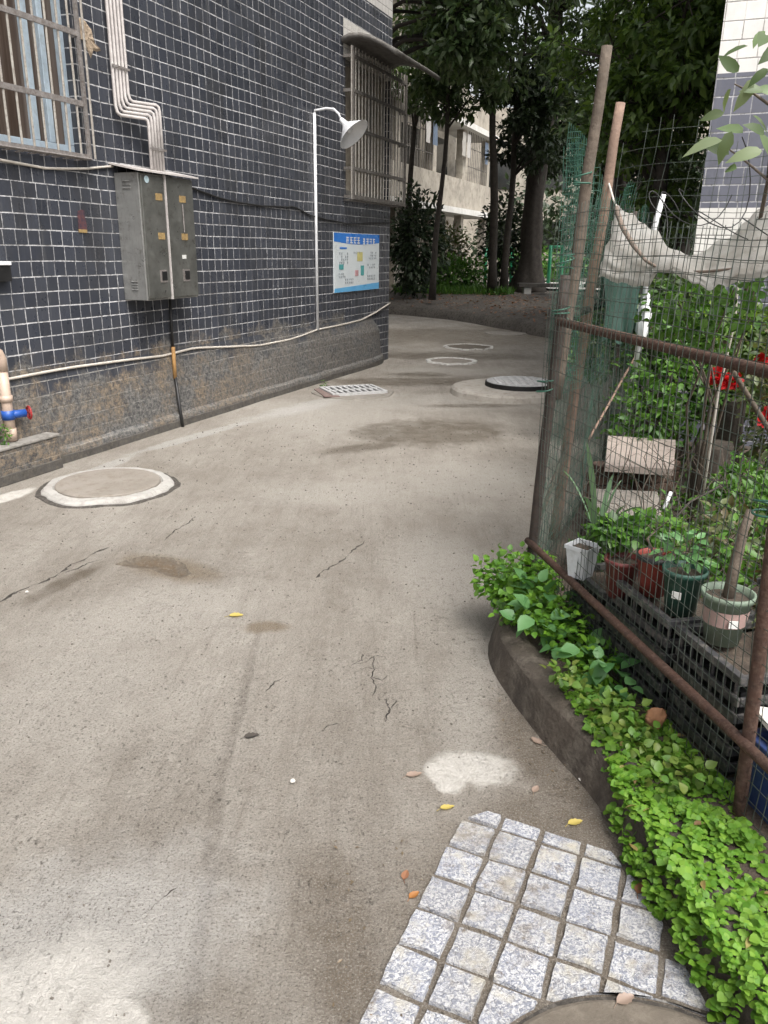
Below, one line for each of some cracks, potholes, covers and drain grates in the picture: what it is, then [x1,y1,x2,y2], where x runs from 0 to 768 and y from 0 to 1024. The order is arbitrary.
drain grate [311,384,394,400]
manhole cover [425,357,478,365]
crack [344,654,397,722]
crack [0,547,109,602]
manhole cover [518,997,715,1024]
manhole cover [450,376,565,404]
crack [316,542,364,578]
manhole cover [443,343,493,351]
manhole cover [35,467,181,509]
